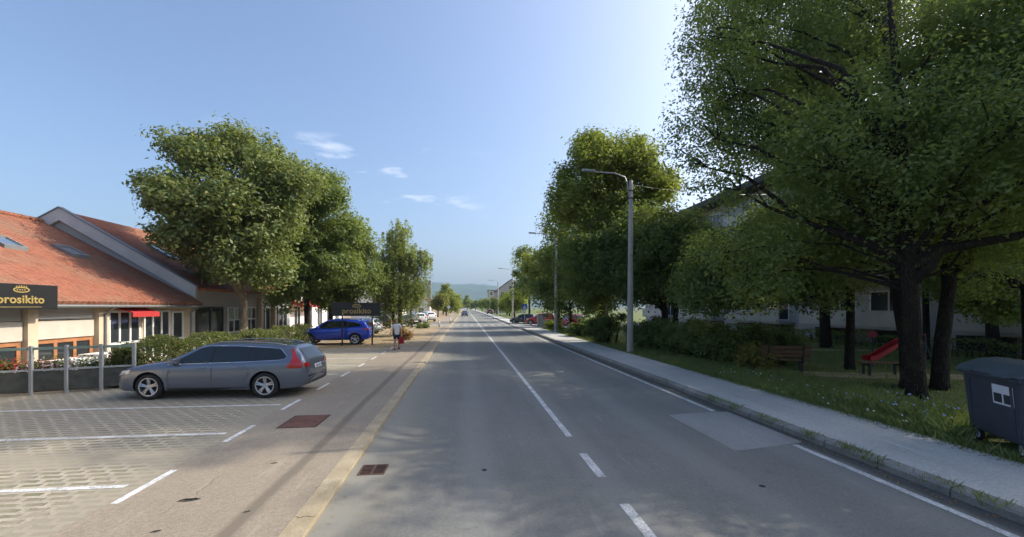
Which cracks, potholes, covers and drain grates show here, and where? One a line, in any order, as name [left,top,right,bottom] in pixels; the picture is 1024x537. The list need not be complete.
manhole cover [277,415,330,428]
drain grate [356,464,389,476]
